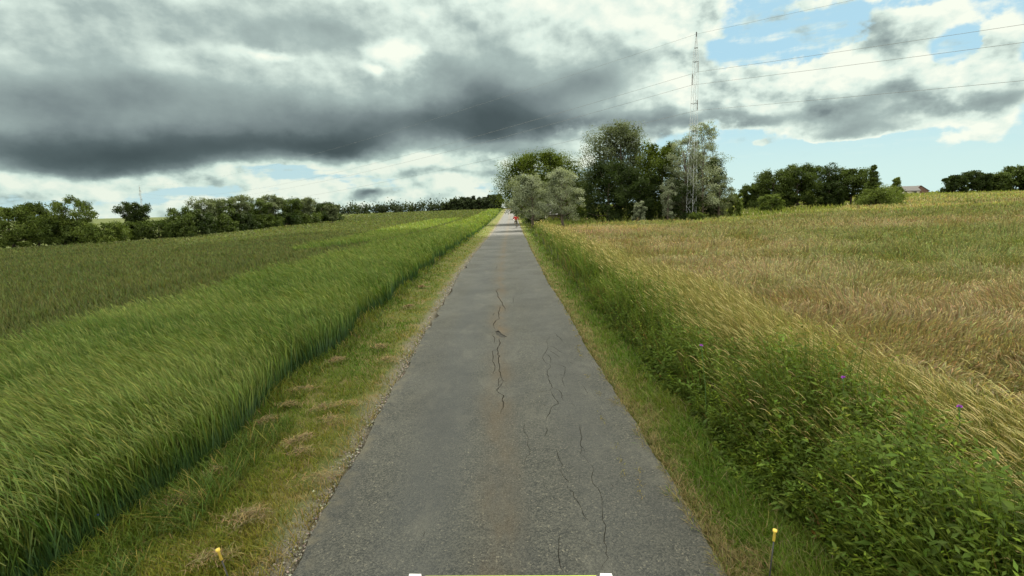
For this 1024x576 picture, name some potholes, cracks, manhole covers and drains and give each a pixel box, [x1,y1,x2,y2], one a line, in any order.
crack [492,290,514,409]
crack [557,430,613,566]
crack [524,333,566,466]
